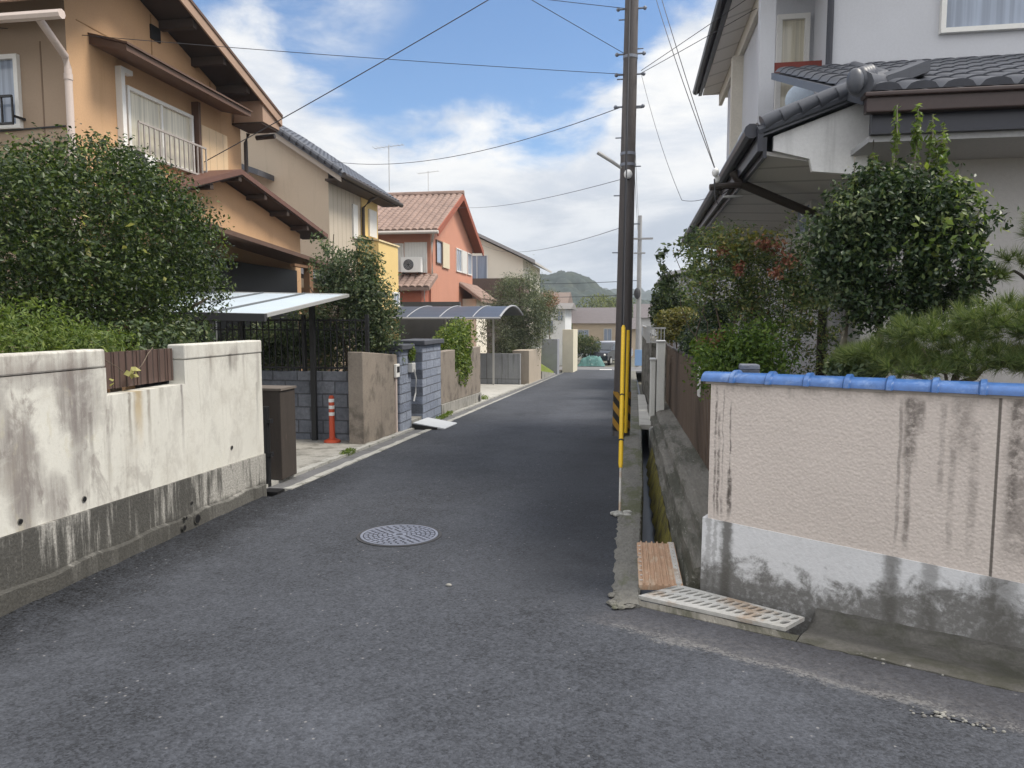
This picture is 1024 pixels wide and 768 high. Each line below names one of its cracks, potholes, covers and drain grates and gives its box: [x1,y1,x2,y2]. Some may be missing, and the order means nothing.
manhole cover [356,524,442,547]
